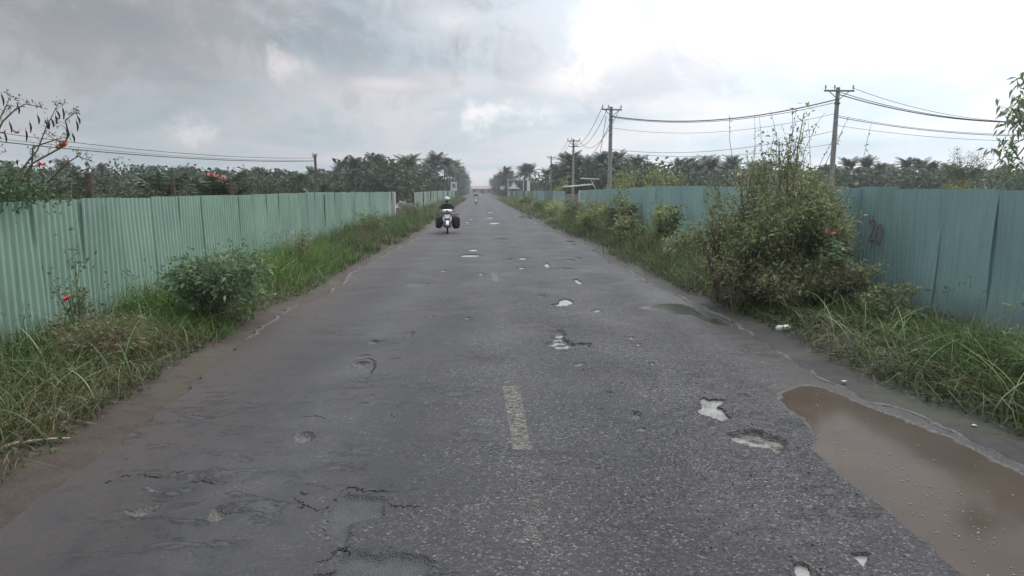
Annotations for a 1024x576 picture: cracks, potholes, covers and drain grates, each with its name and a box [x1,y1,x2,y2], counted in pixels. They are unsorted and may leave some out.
crack [313,543,352,576]
pothole [294,431,316,443]
pothole [851,552,871,566]
pothole [725,429,789,453]
crack [294,487,422,512]
pothole [541,329,592,349]
pothole [697,397,732,421]
pothole [791,560,813,576]
